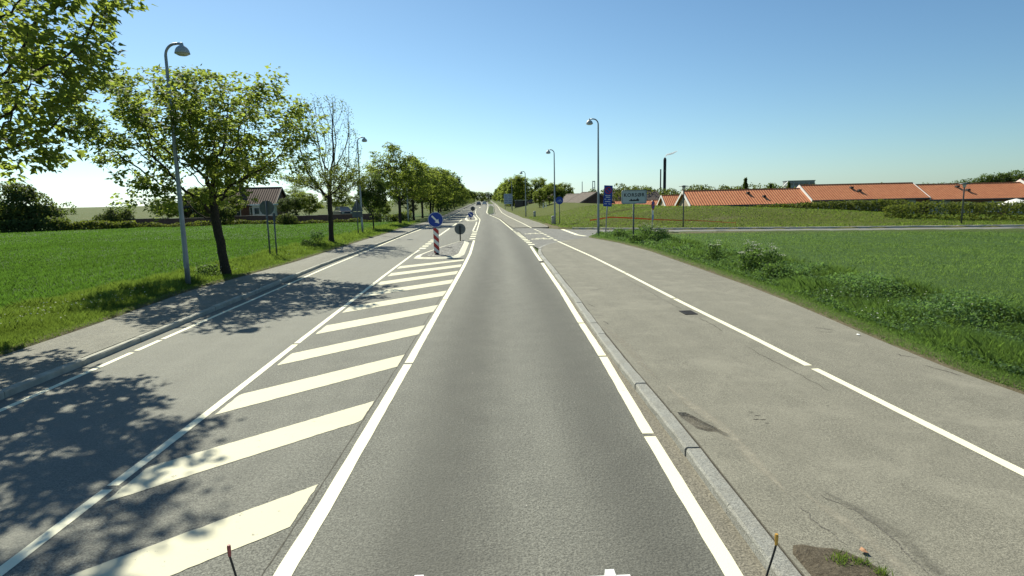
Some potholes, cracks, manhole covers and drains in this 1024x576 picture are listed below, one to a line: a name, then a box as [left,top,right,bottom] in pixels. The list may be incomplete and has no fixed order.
pothole [677,412,721,432]
crack [799,495,932,576]
